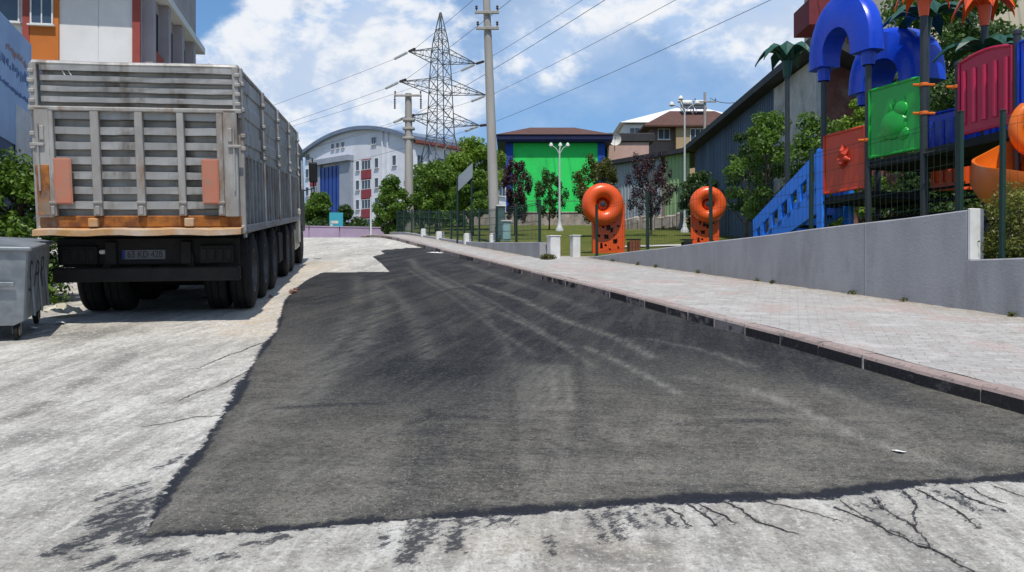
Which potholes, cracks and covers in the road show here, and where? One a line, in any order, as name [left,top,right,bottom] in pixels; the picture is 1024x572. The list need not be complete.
crack [666,490,975,572]
crack [951,485,1024,511]
crack [142,339,271,427]
